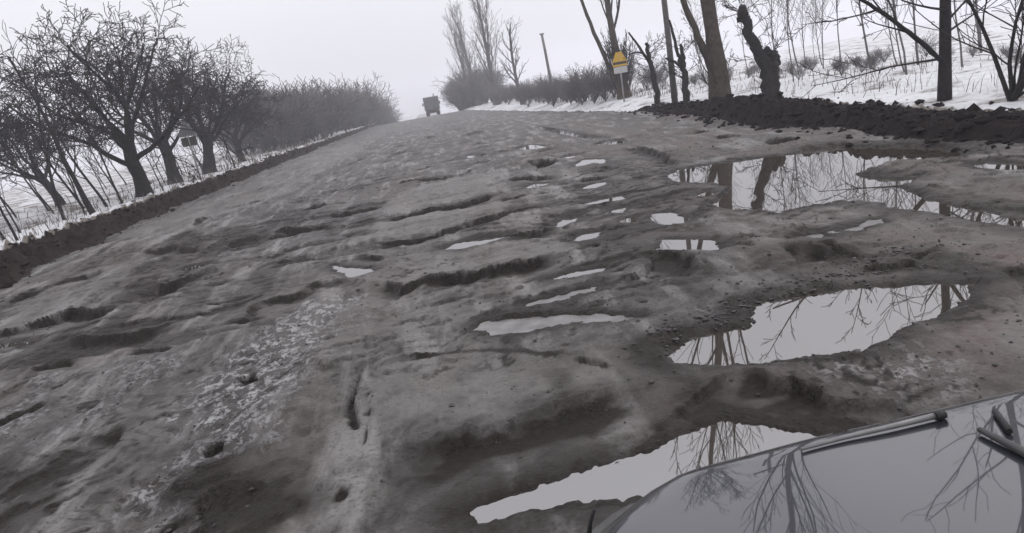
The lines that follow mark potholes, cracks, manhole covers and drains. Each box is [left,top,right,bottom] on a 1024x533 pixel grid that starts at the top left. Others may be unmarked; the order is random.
pothole [368,380,669,533]
pothole [341,252,572,309]
pothole [627,267,1024,380]
pothole [336,482,356,503]
pothole [203,435,228,458]
pothole [649,139,1024,235]
